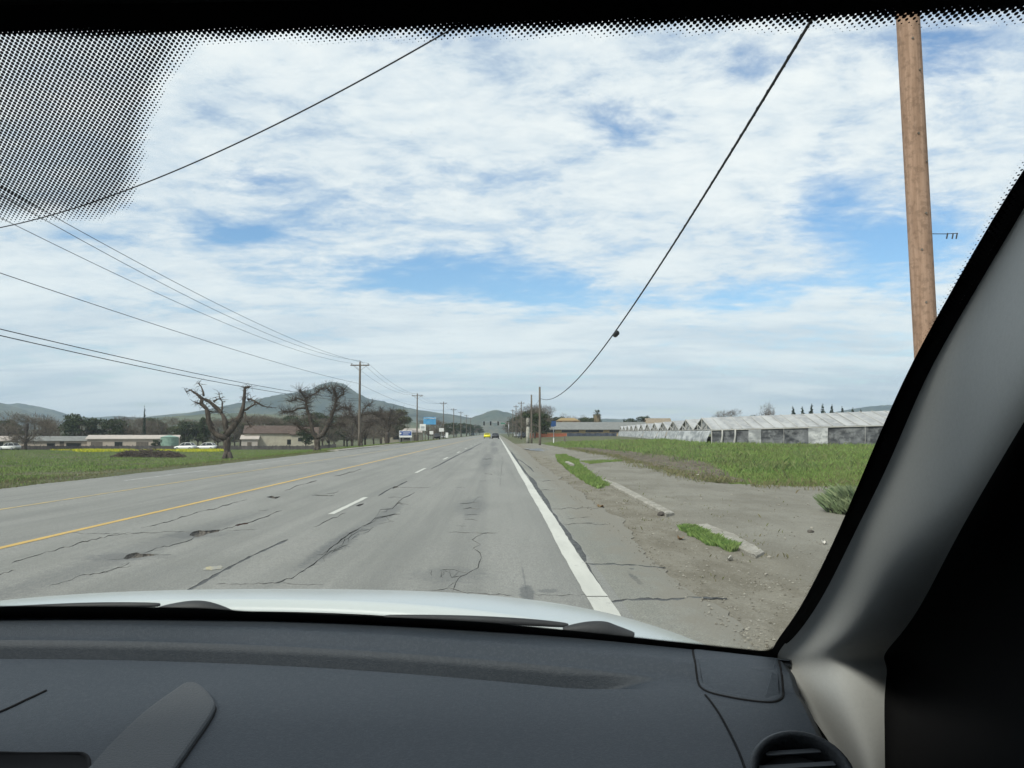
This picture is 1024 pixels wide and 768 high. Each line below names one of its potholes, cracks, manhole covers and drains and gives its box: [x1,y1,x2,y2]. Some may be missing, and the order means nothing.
crack [431,487,511,596]
crack [220,487,428,585]
crack [0,499,282,586]
